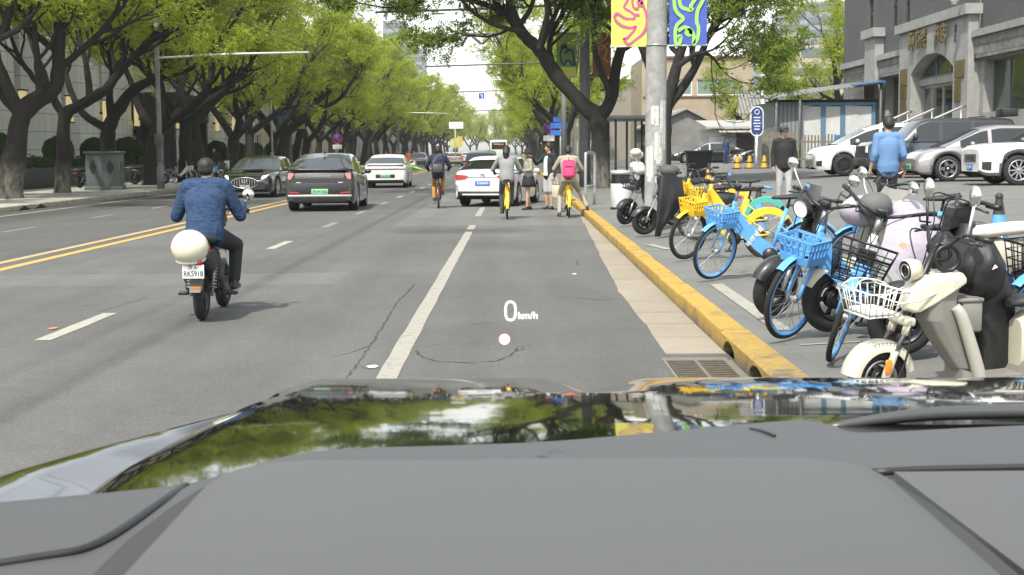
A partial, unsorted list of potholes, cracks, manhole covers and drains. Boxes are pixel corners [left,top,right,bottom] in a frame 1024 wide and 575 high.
crack [336,284,415,379]
crack [410,343,523,363]
drain grate [661,357,748,378]
